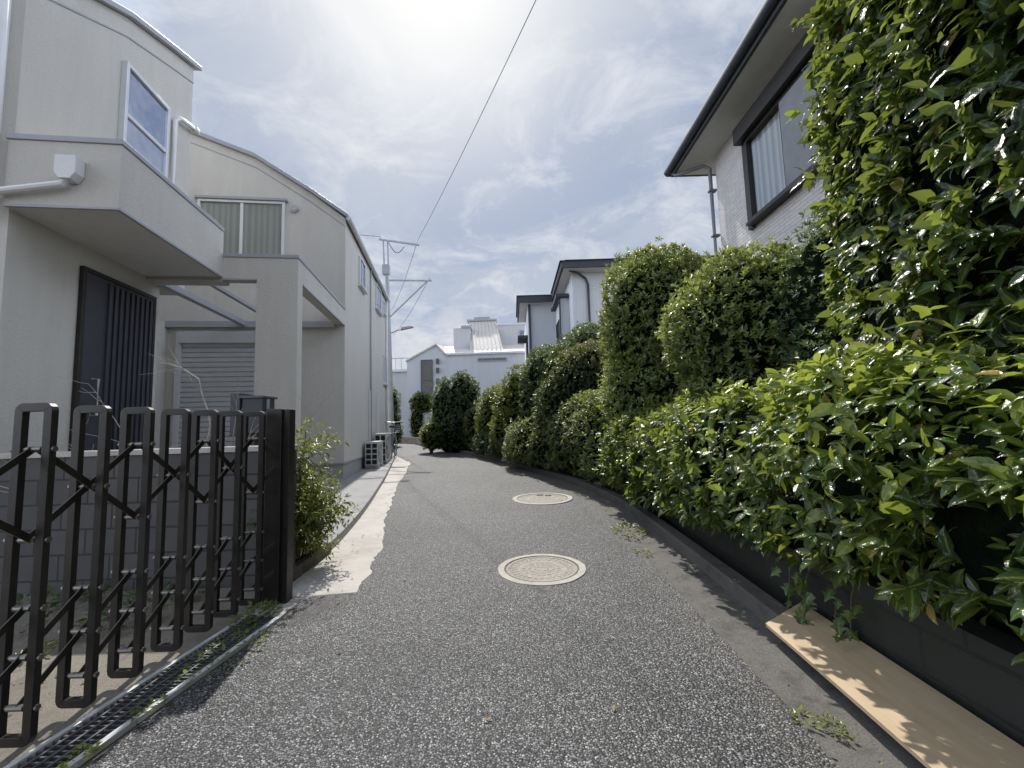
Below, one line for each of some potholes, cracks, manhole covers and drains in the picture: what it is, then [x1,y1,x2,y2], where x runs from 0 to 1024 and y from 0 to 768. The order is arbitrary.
manhole cover [513,493,572,505]
manhole cover [498,554,586,586]
